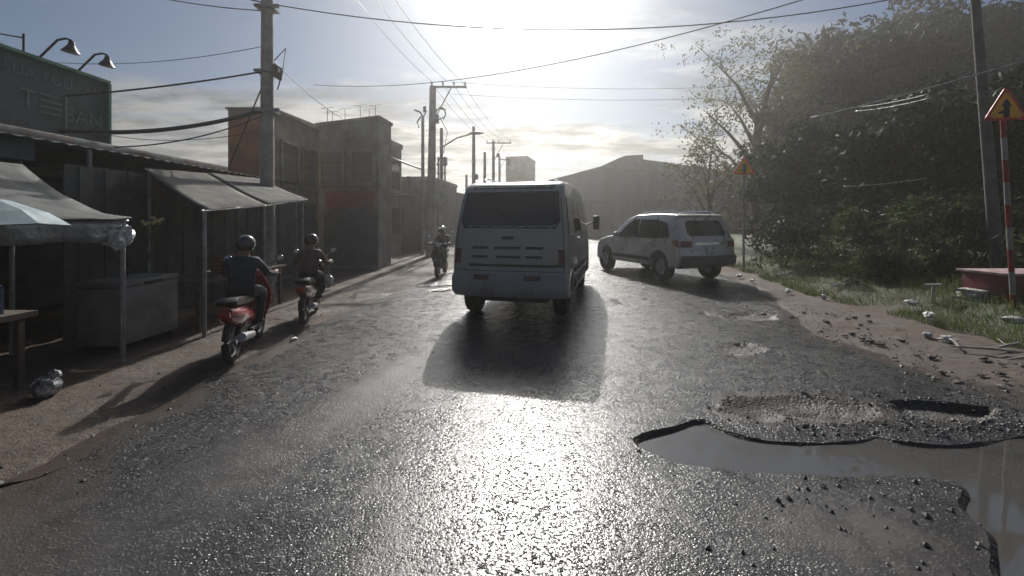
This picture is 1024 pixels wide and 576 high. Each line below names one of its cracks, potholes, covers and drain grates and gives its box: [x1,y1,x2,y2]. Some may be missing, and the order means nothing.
pothole [727,312,779,321]
pothole [888,399,998,421]
pothole [633,419,1024,576]
pothole [712,342,769,356]
pothole [716,394,883,425]
